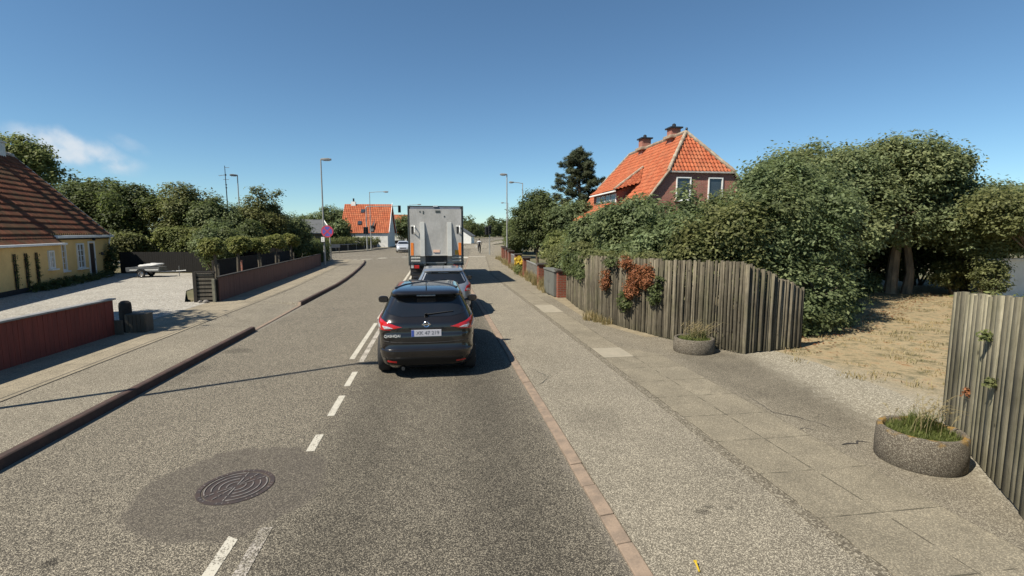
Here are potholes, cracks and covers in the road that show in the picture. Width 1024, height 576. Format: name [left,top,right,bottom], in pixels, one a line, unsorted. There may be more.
manhole cover [195,469,275,506]
